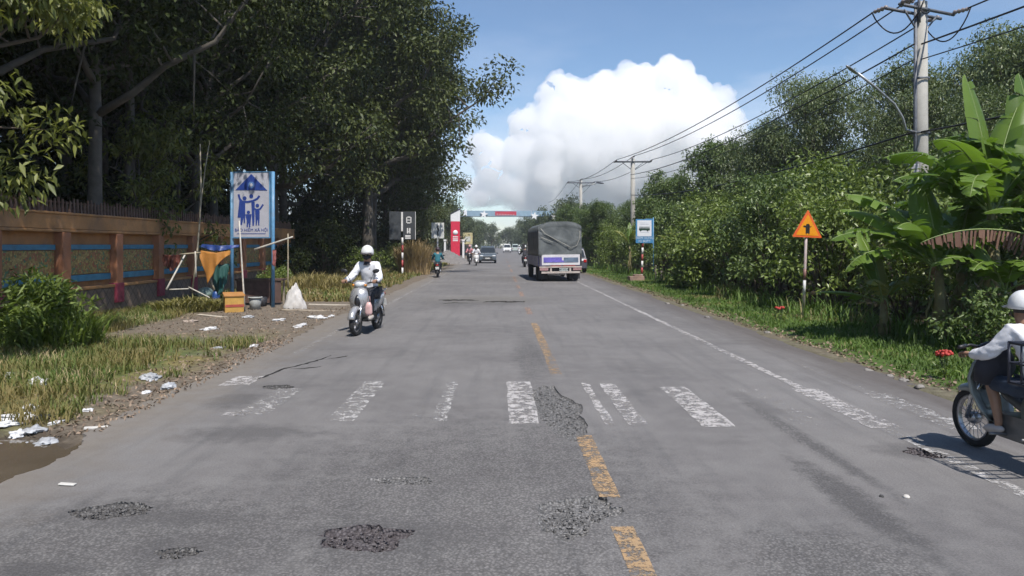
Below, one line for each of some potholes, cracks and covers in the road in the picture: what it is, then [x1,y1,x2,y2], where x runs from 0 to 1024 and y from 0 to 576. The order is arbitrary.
pothole [538,495,625,543]
pothole [527,385,588,442]
pothole [901,447,949,459]
pothole [68,501,154,520]
pothole [154,547,204,559]
pothole [317,524,415,553]
